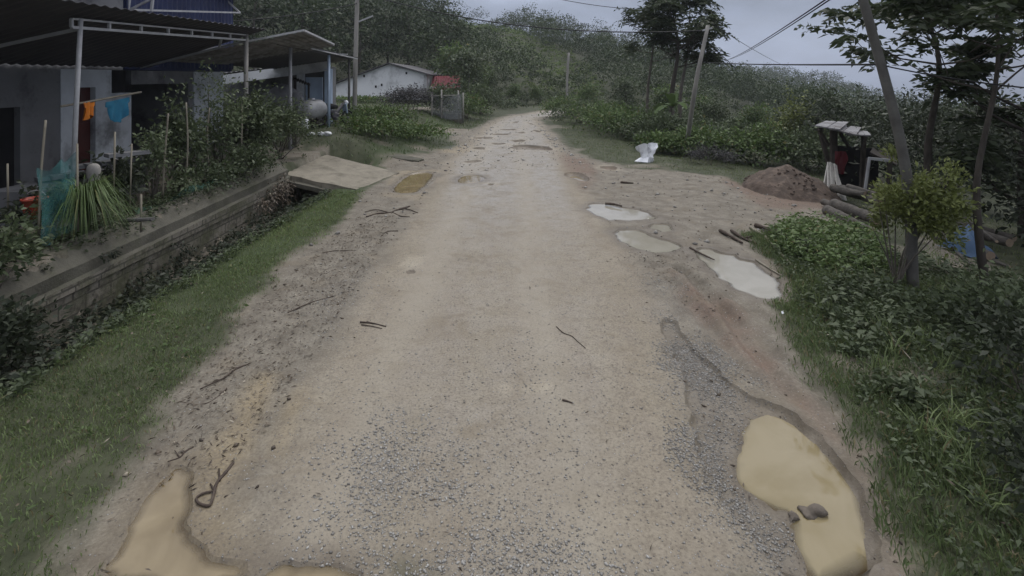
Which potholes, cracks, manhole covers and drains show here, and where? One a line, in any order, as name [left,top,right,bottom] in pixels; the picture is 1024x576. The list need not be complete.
pothole [693,247,784,299]
pothole [457,175,486,184]
pothole [660,318,883,576]
pothole [393,172,433,193]
pothole [99,465,252,576]
pothole [613,229,683,253]
pothole [563,172,590,181]
pothole [585,203,657,221]
